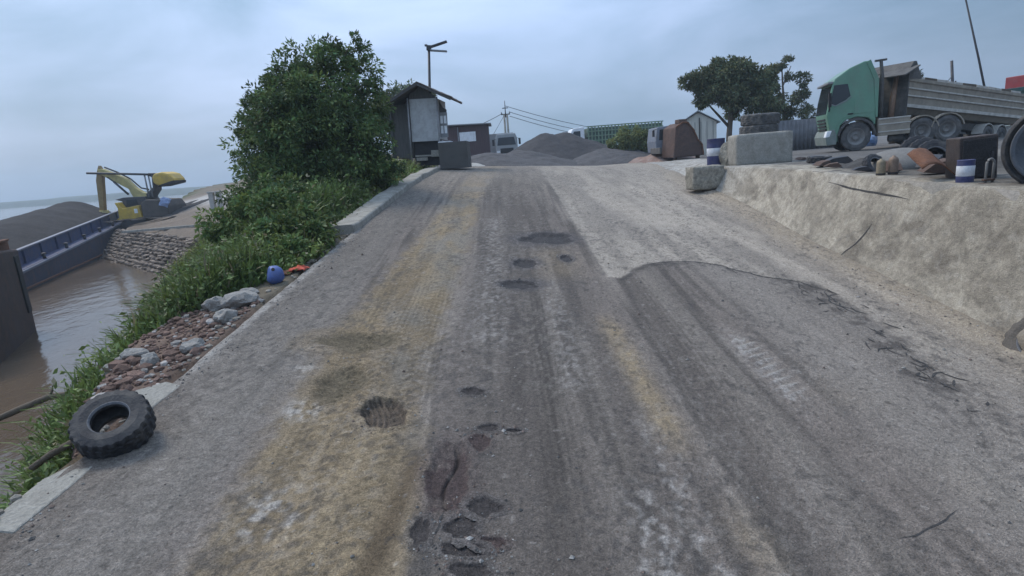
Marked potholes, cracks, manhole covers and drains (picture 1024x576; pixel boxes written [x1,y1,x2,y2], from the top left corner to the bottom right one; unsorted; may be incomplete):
pothole [501,426,527,436]
pothole [509,258,541,269]
pothole [455,385,490,397]
pothole [466,532,513,555]
pothole [457,491,512,523]
crack [896,511,955,539]
pothole [441,559,498,576]
pothole [463,431,497,456]
pothole [415,436,480,520]
pothole [472,421,503,434]
pothole [557,254,575,263]
